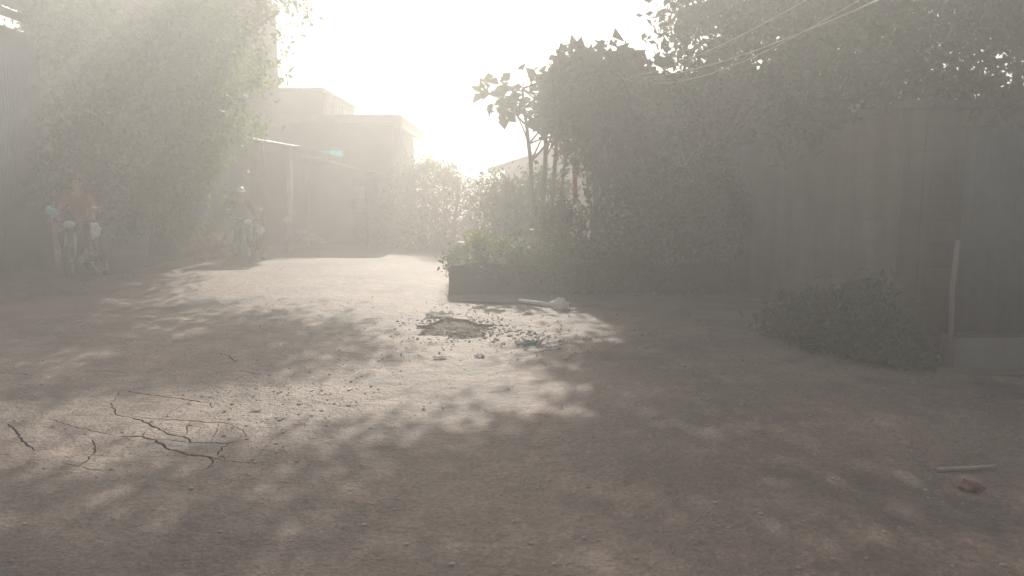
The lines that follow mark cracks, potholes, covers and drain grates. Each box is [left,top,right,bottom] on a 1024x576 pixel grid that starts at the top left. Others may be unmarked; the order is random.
pothole [416,317,497,339]
crack [49,390,252,469]
crack [7,424,35,451]
